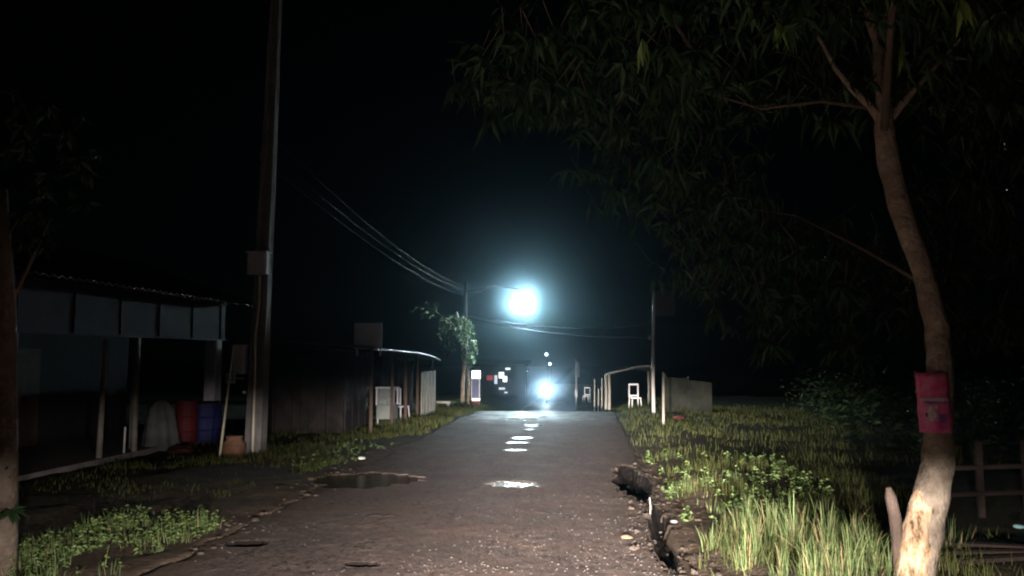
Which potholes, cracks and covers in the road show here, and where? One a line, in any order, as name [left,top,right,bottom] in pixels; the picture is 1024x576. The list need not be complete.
pothole [646,504,684,575]
pothole [305,472,429,489]
pothole [219,540,273,548]
pothole [609,464,655,506]
